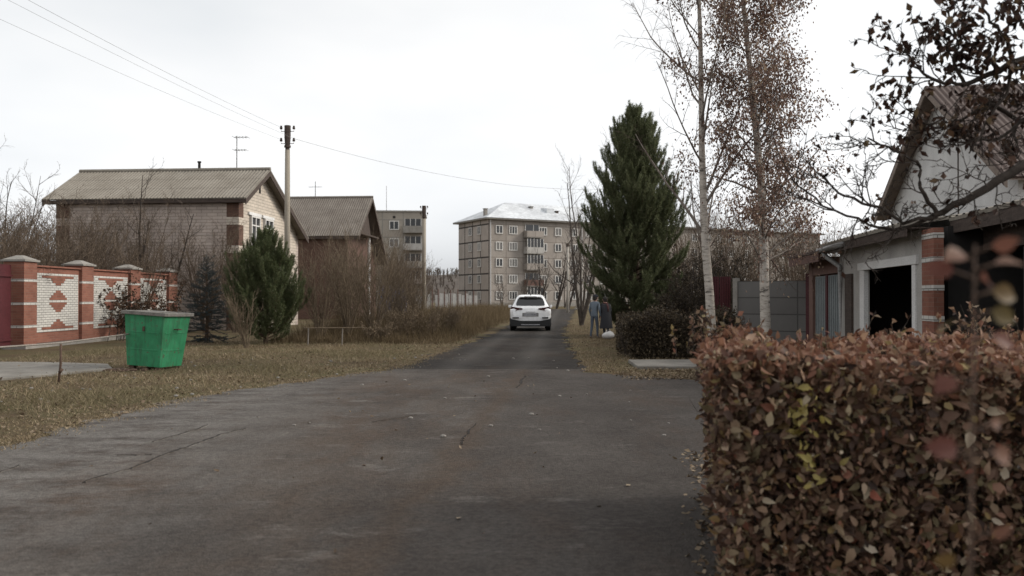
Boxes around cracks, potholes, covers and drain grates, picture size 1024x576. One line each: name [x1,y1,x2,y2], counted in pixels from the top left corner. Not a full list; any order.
crack [460,423,477,444]
crack [83,424,247,483]
